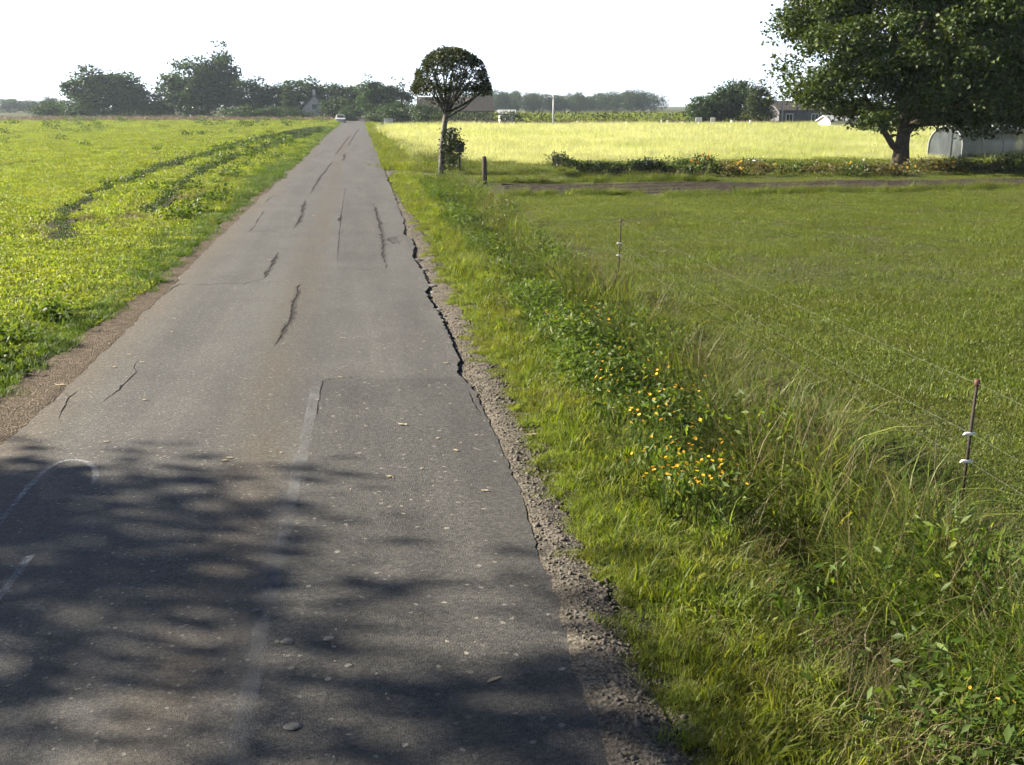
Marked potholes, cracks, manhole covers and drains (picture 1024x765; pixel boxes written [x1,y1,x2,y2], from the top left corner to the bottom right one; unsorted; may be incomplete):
crack [101,363,137,403]
crack [248,129,388,270]
crack [167,253,300,344]
